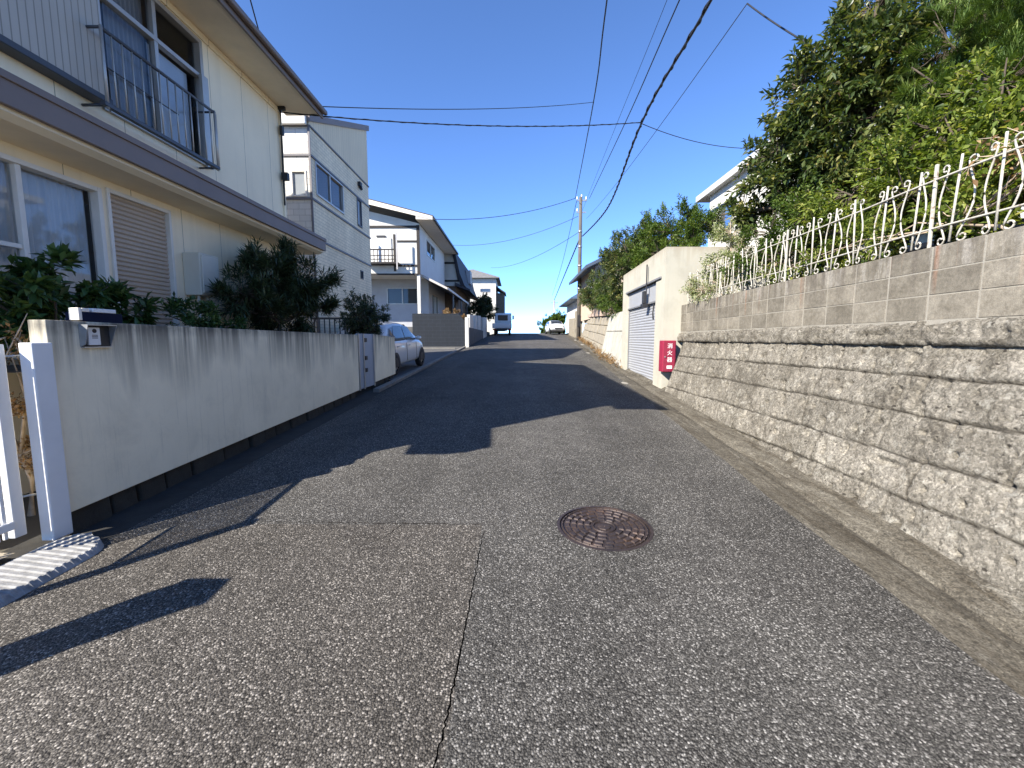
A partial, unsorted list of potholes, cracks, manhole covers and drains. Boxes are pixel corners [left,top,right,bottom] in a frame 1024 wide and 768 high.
crack [264,521,484,768]
manhole cover [557,506,654,551]
